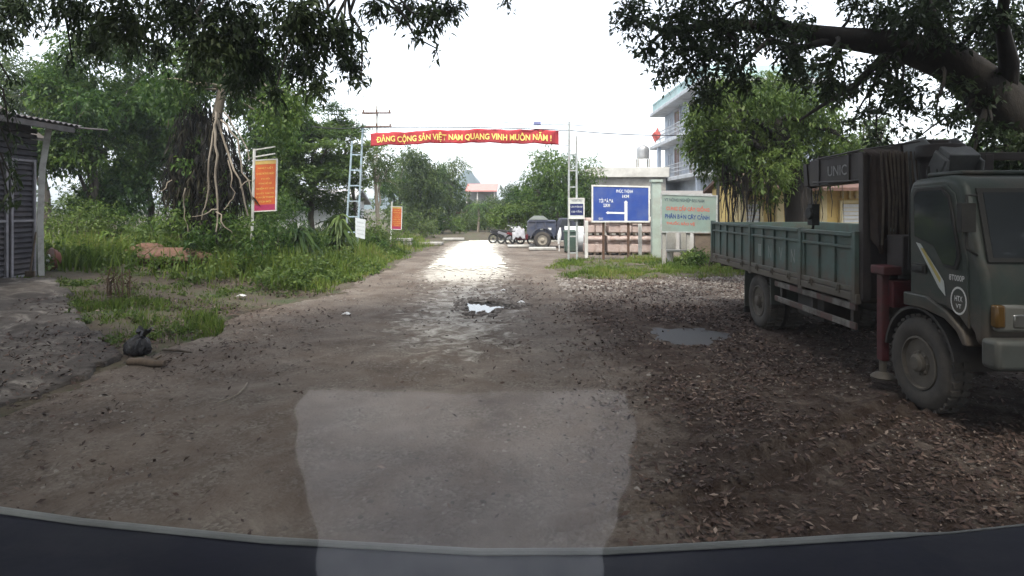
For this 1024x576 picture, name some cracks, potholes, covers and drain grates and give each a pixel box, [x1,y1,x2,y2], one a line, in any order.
pothole [461,300,516,313]
